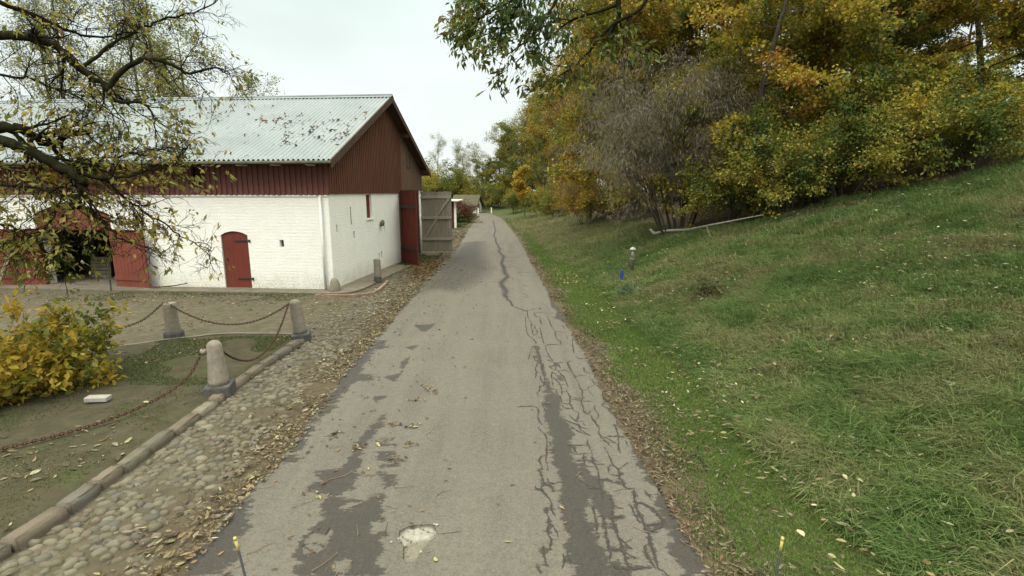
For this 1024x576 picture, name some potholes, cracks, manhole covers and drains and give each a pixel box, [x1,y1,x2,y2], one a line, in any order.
pothole [390,523,439,562]
crack [492,221,531,311]
